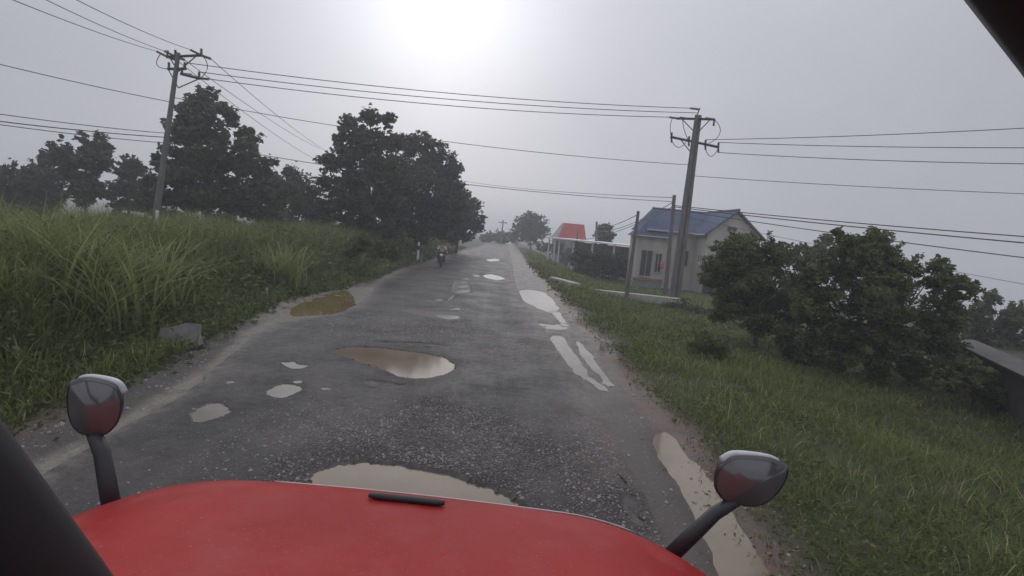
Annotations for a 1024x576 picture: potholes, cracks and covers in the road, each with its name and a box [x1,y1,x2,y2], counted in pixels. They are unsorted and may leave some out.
pothole [397,309,463,321]
pothole [265,382,304,398]
pothole [188,401,233,422]
pothole [280,360,310,369]
pothole [307,458,542,509]
pothole [331,345,457,378]
